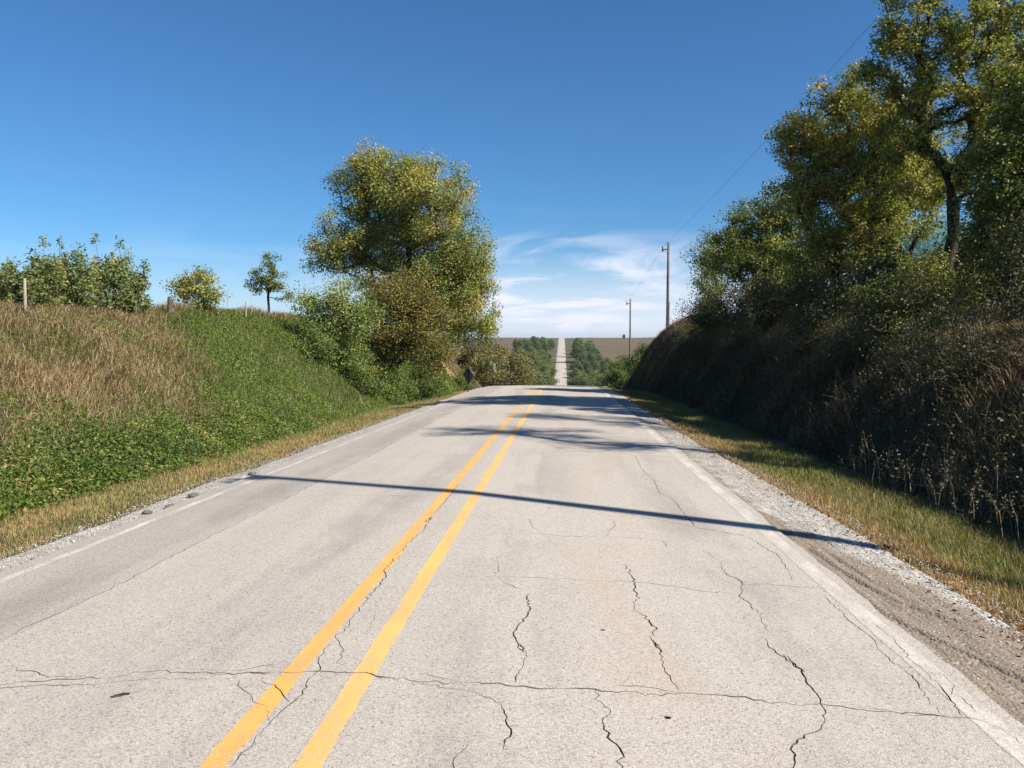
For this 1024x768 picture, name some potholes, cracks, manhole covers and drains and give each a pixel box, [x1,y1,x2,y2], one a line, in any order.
crack [1,462,1018,768]
